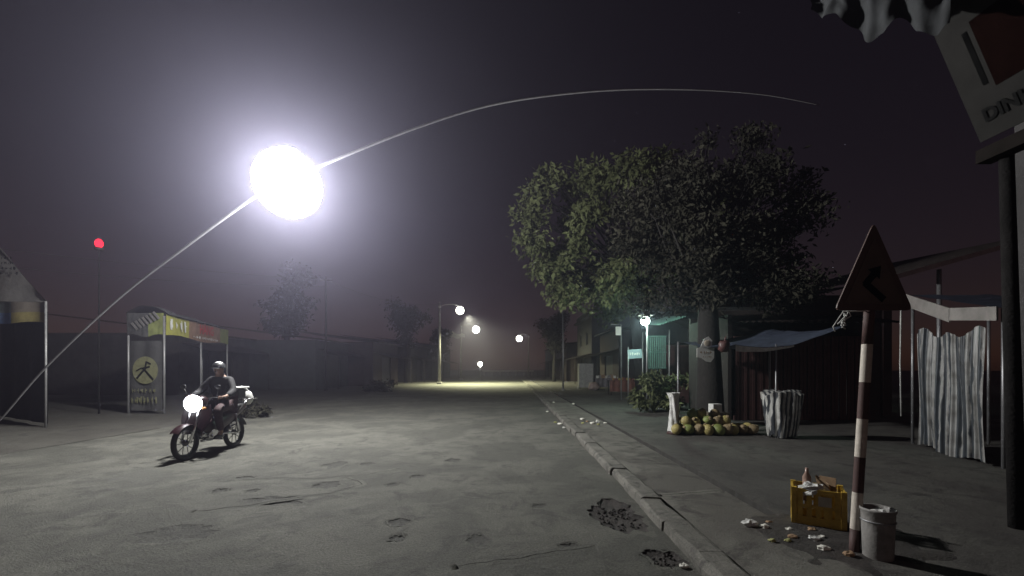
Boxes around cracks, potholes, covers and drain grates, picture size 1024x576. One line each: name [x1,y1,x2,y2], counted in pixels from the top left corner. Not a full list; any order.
pothole [385,517,414,528]
crack [193,468,398,513]
pothole [579,494,657,540]
pothole [636,547,694,572]
pothole [462,532,494,549]
pothole [308,480,344,489]
pothole [119,522,229,546]
pothole [386,534,407,542]
